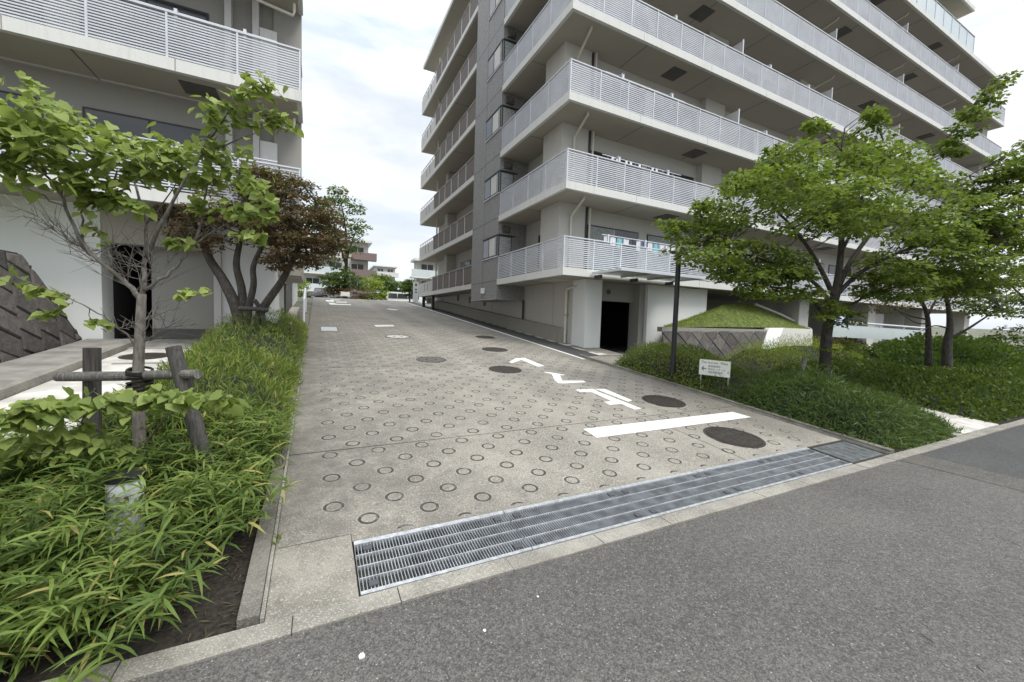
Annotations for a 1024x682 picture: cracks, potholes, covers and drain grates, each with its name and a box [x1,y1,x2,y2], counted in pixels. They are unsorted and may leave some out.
drain grate [613,470,740,518]
manhole cover [642,395,686,408]
manhole cover [703,427,766,448]
drain grate [503,488,652,550]
drain grate [354,511,532,596]
